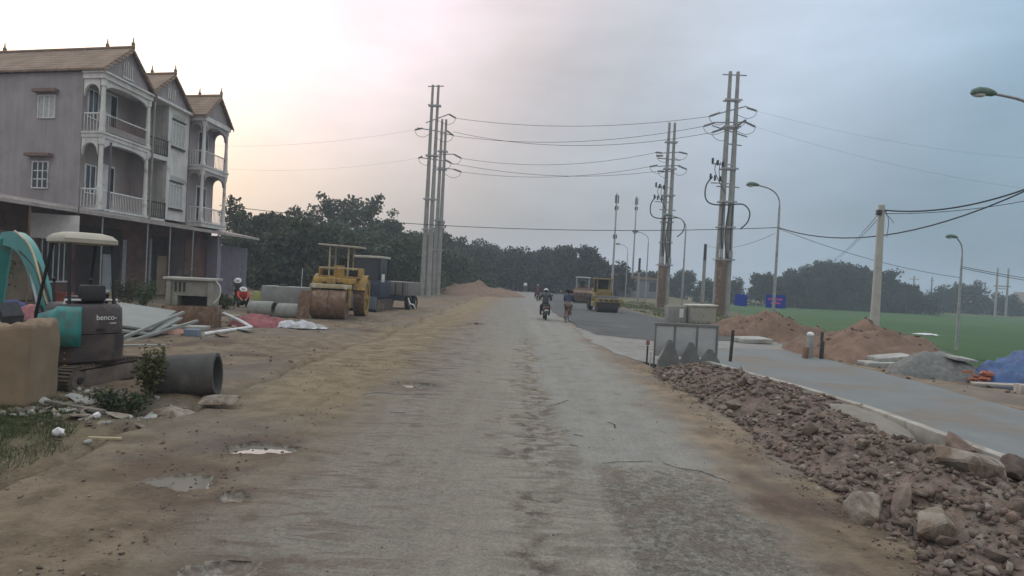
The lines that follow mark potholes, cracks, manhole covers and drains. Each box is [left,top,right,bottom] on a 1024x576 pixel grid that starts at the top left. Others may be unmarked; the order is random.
crack [602,461,730,483]
pothole [217,440,306,455]
pothole [171,557,270,576]
pothole [133,471,218,494]
pothole [210,489,254,504]
